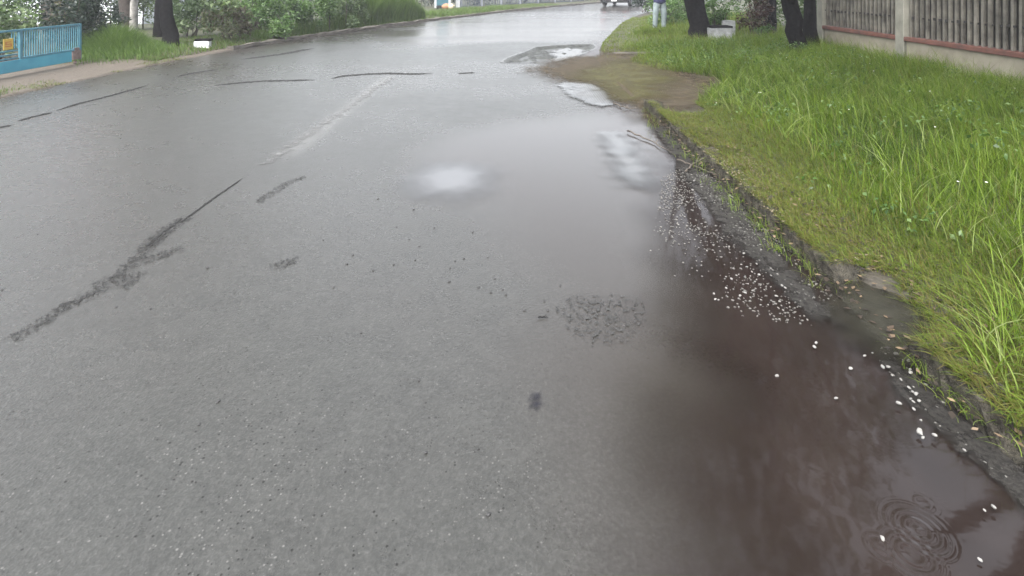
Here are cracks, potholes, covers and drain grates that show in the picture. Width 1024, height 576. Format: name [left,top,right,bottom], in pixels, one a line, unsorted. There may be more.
pothole [500,44,597,63]
